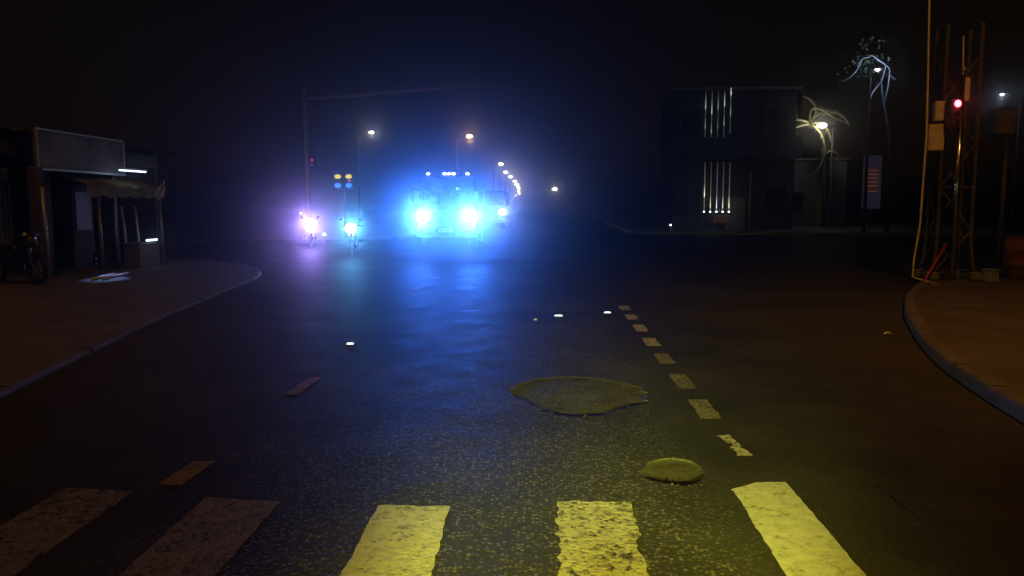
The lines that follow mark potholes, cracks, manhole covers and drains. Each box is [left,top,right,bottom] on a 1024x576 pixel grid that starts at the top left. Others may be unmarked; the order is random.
crack [873,479,923,523]
